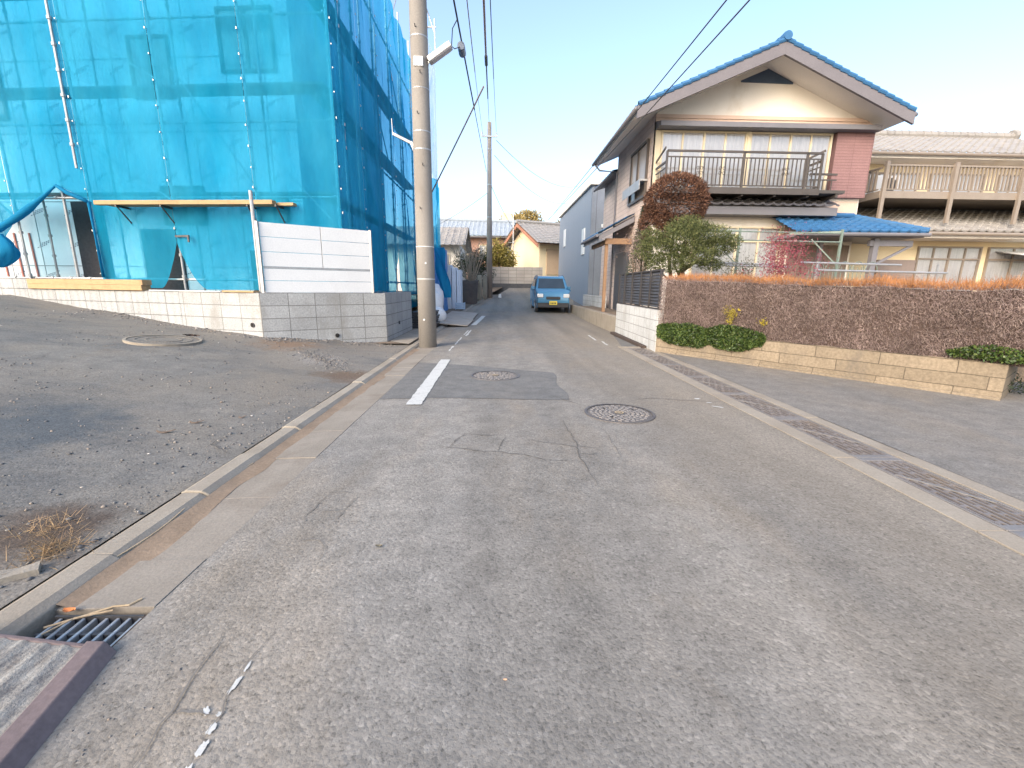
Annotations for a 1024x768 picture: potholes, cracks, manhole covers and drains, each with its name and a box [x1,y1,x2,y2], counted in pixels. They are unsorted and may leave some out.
crack [419,424,600,485]
manhole cover [471,371,520,381]
drain grate [34,615,145,646]
manhole cover [584,404,655,424]
crack [295,491,358,555]
manhole cover [122,335,202,346]
